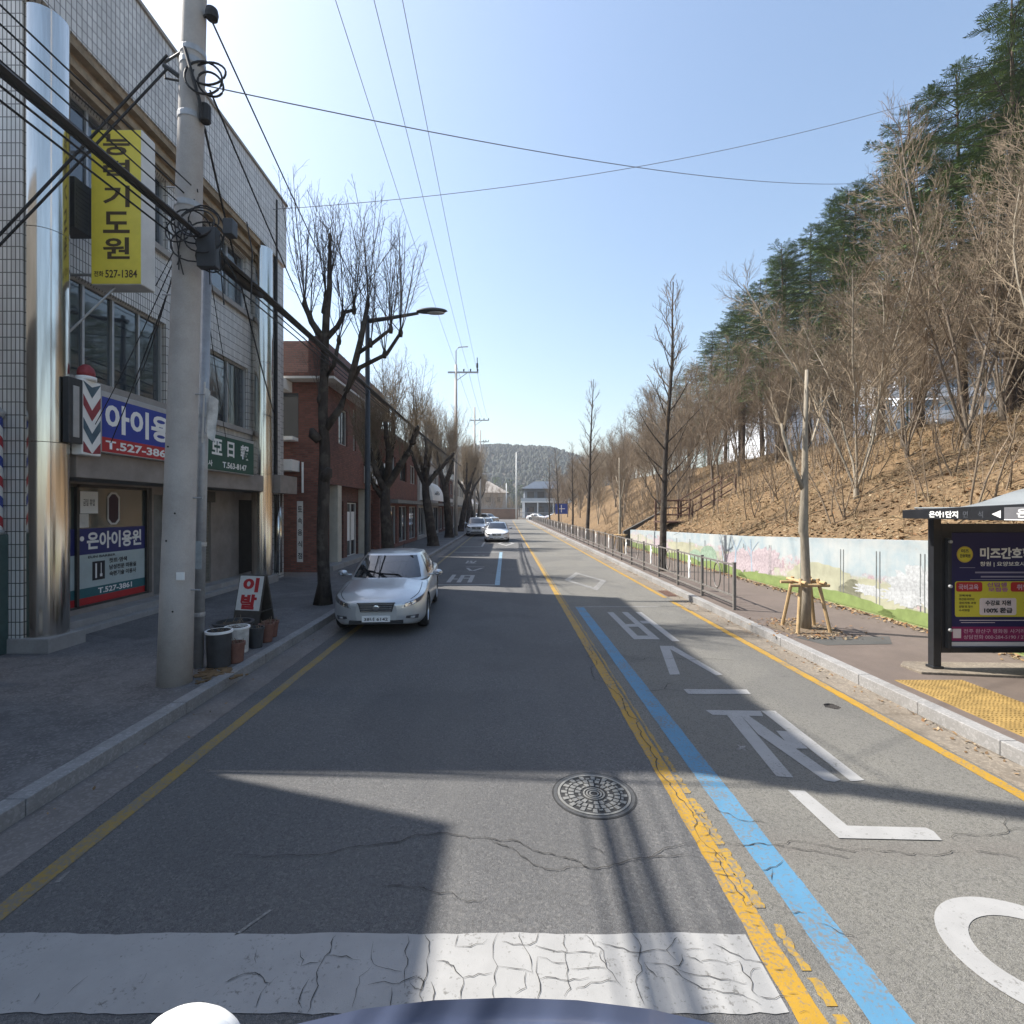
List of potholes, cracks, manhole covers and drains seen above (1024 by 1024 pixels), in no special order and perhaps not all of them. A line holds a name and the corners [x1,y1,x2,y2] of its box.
crack [3,648,806,1013]
manhole cover [552,773,637,820]
